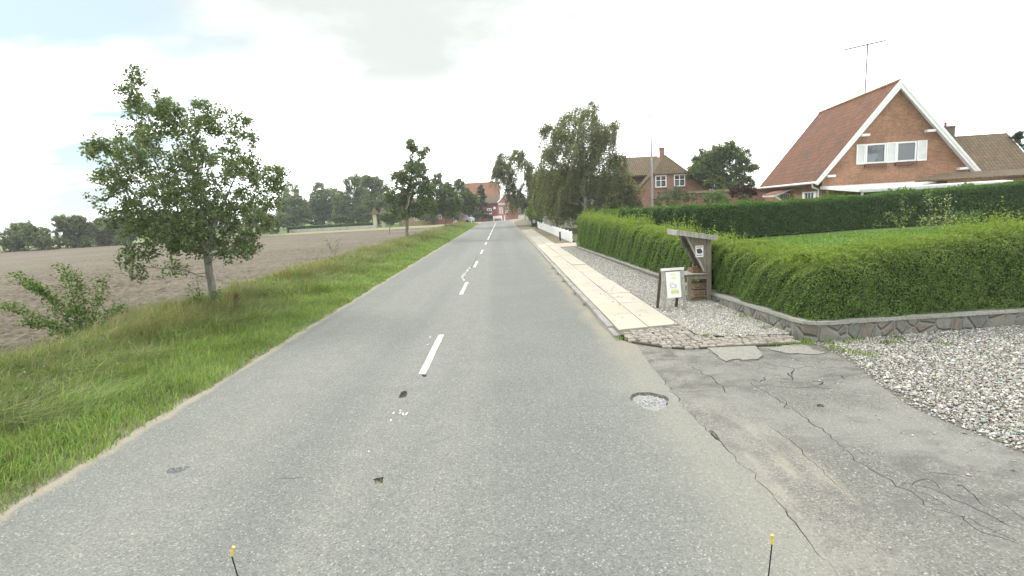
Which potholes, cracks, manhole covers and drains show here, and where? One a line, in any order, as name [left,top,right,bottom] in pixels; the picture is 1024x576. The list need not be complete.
crack [688,348,1024,546]
crack [652,367,838,576]
pothole [630,392,669,411]
